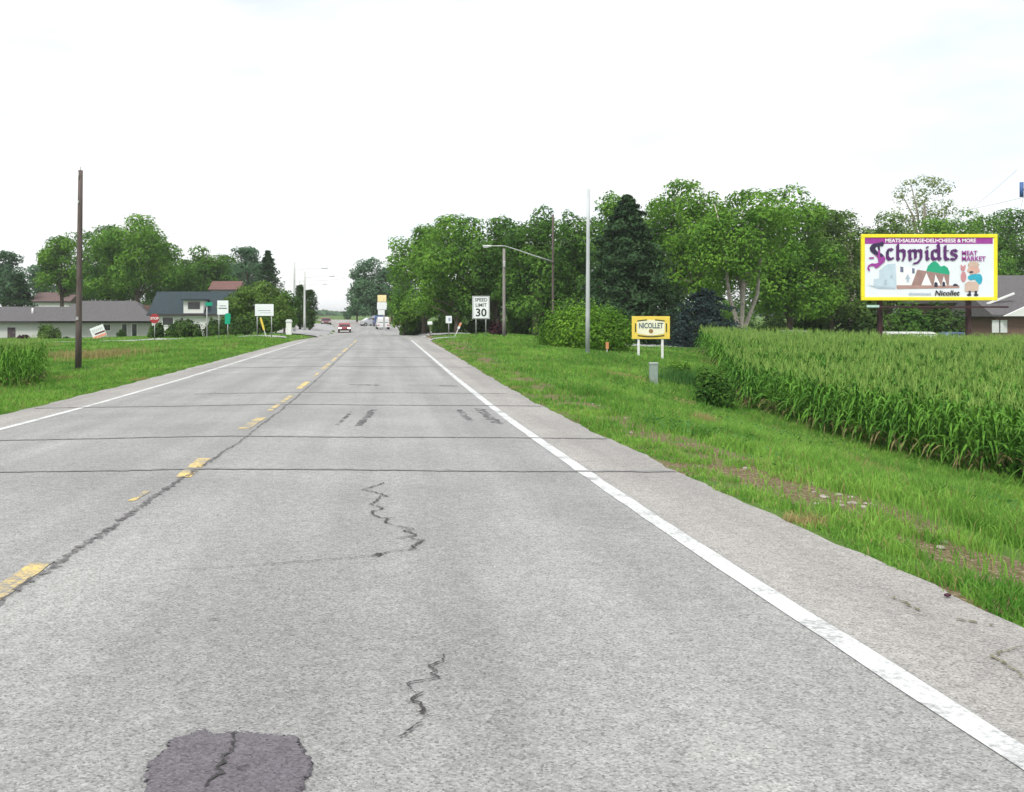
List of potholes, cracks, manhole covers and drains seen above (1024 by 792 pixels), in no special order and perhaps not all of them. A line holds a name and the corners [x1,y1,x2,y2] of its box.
crack [399,654,445,736]
crack [197,482,424,569]
crack [990,645,1024,677]
